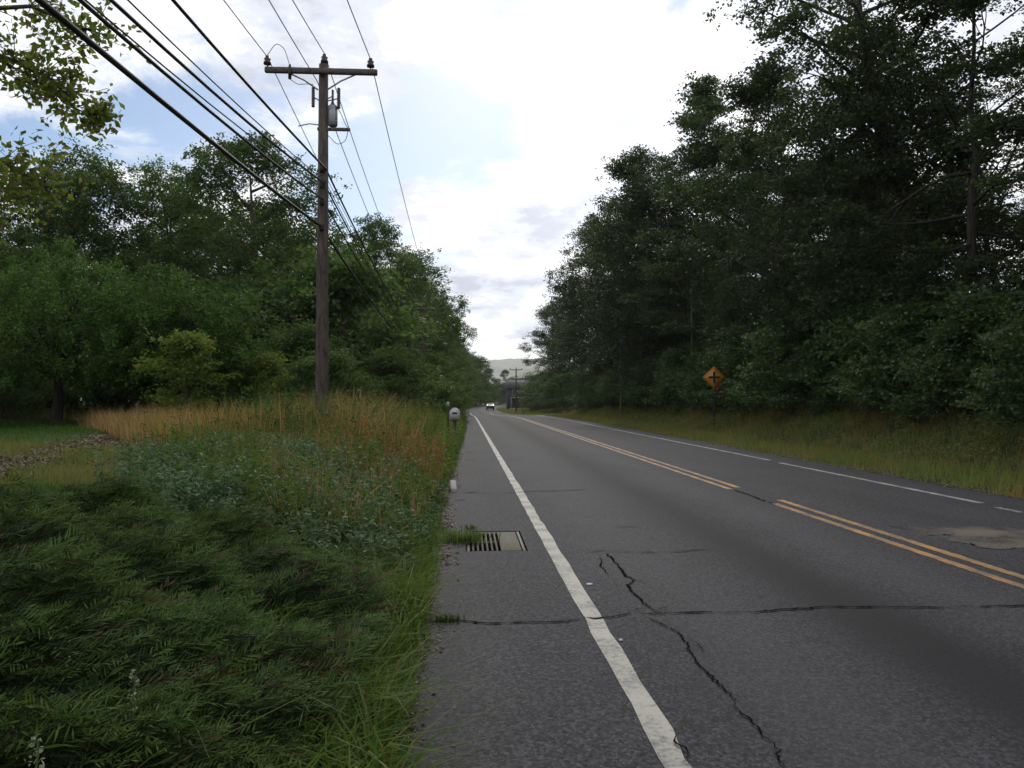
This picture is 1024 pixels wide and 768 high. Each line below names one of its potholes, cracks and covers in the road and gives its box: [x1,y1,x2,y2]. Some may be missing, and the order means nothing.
crack [423,548,1024,768]
drain grate [466,532,527,552]
